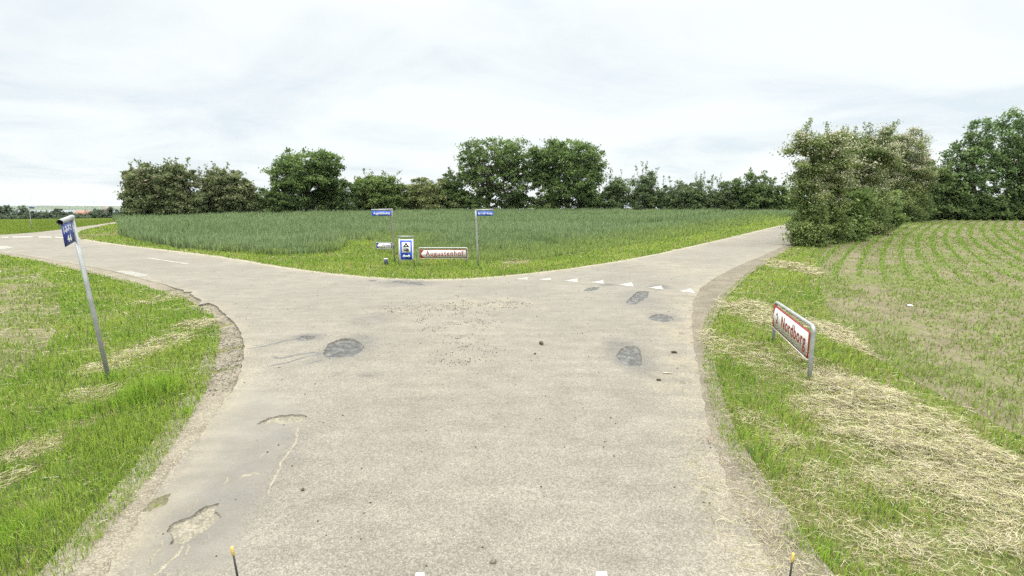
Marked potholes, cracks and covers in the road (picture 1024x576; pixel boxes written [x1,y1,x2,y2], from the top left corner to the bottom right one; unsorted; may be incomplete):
crack [224,419,307,493]
crack [145,498,210,576]
pothole [258,414,307,424]
pothole [166,503,221,545]
